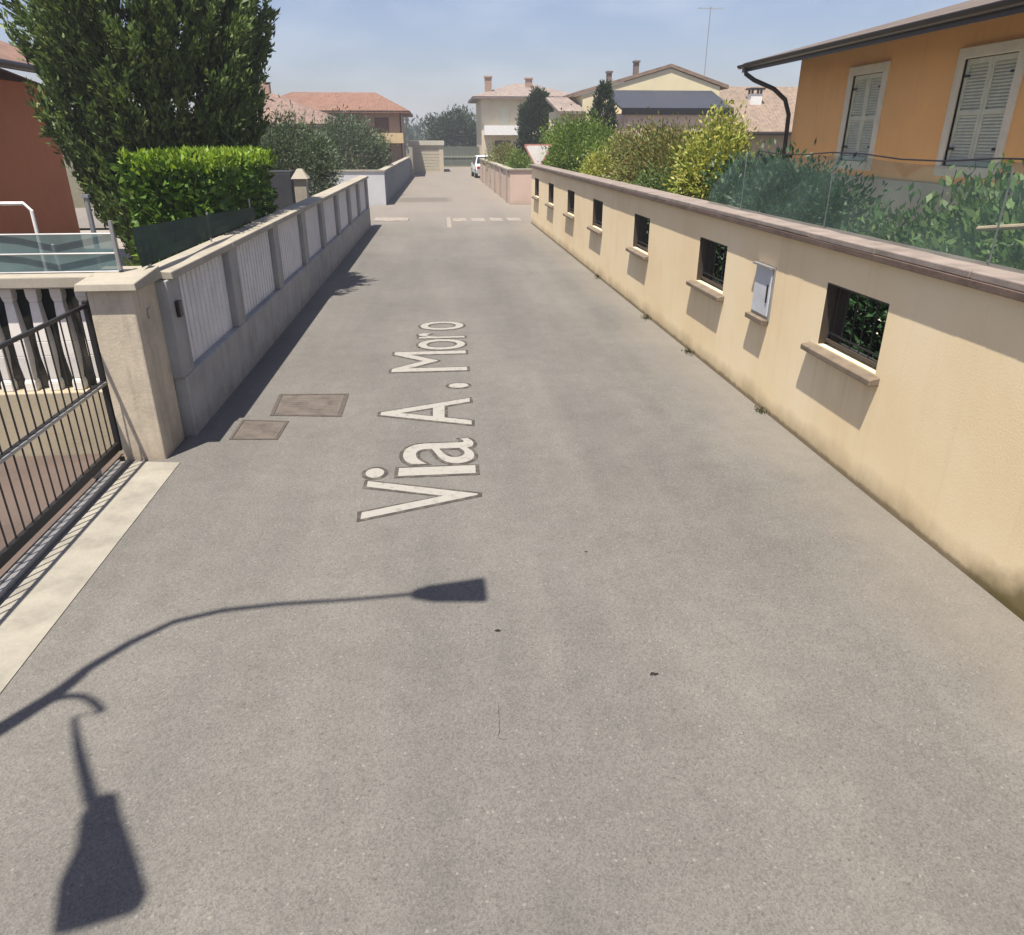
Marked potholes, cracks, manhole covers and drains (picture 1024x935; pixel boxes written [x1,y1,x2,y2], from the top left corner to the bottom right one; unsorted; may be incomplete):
manhole cover [229,419,289,440]
manhole cover [270,393,349,417]
